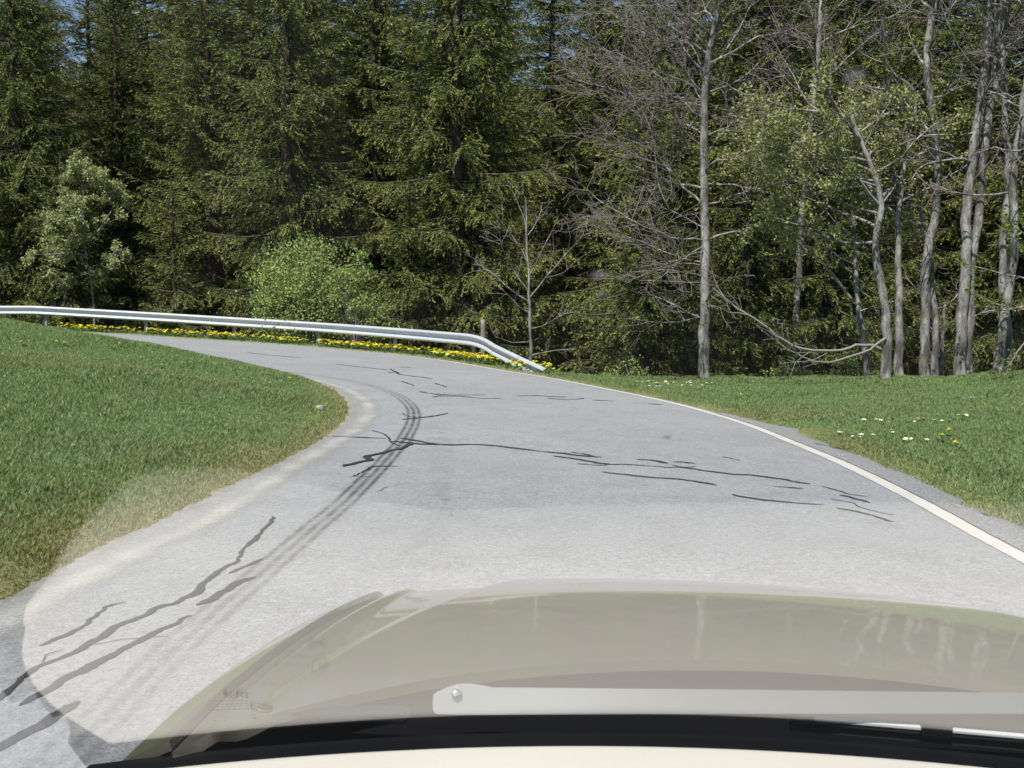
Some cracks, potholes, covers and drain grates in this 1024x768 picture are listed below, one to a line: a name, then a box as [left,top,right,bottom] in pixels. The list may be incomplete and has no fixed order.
crack [334,364,894,522]
